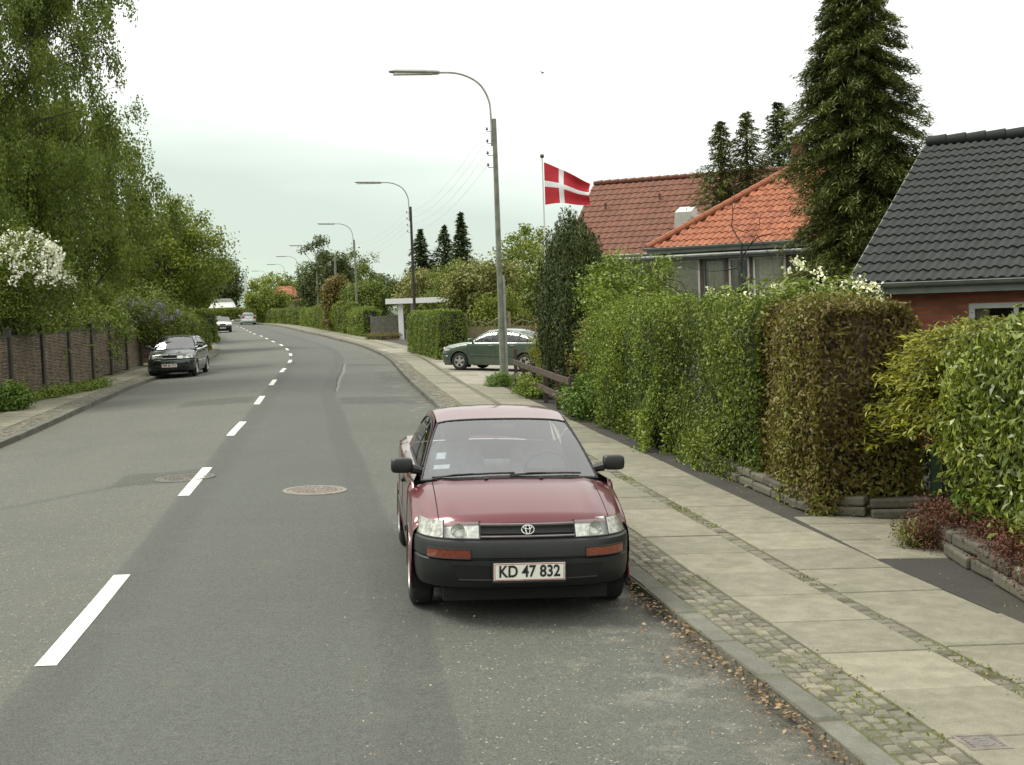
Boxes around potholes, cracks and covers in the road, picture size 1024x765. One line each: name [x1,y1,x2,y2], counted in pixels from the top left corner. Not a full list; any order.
utility cover [951,733,1014,750]
manhole cover [154,473,216,482]
manhole cover [282,485,347,495]
